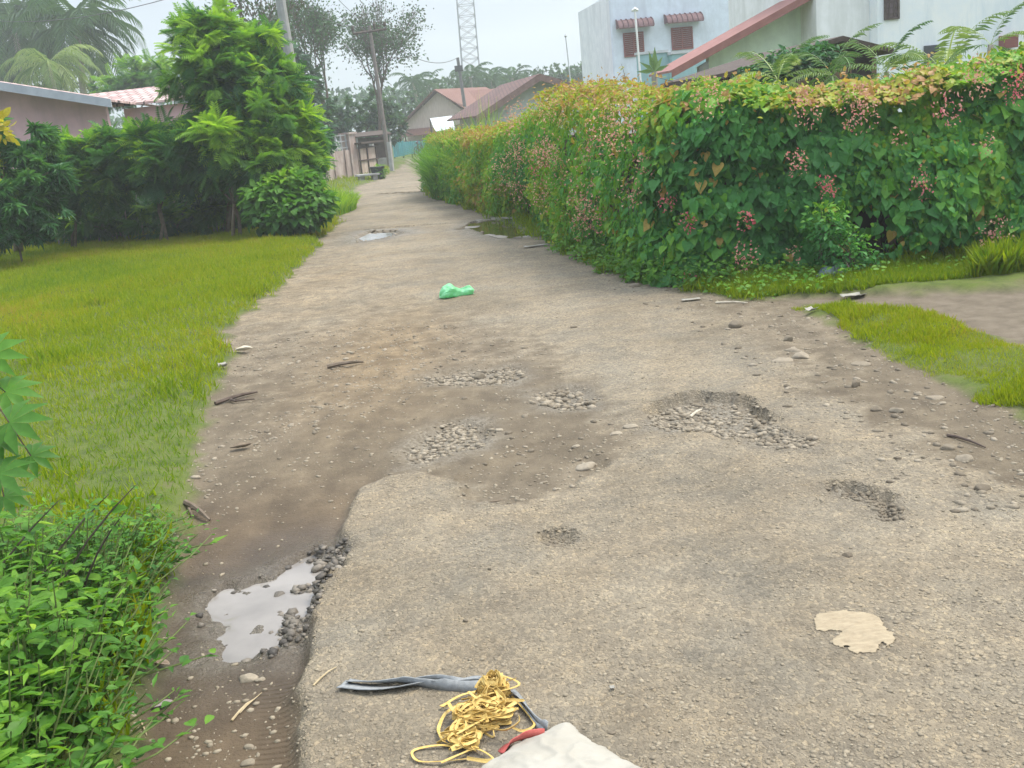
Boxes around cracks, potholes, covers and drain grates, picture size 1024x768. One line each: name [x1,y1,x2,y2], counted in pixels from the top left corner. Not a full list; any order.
pothole [524,383,607,413]
pothole [348,229,411,243]
pothole [819,479,914,525]
pothole [408,363,537,389]
pothole [528,526,587,549]
pothole [391,418,501,466]
pothole [465,217,534,239]
pothole [187,537,352,670]
pothole [630,390,830,456]
